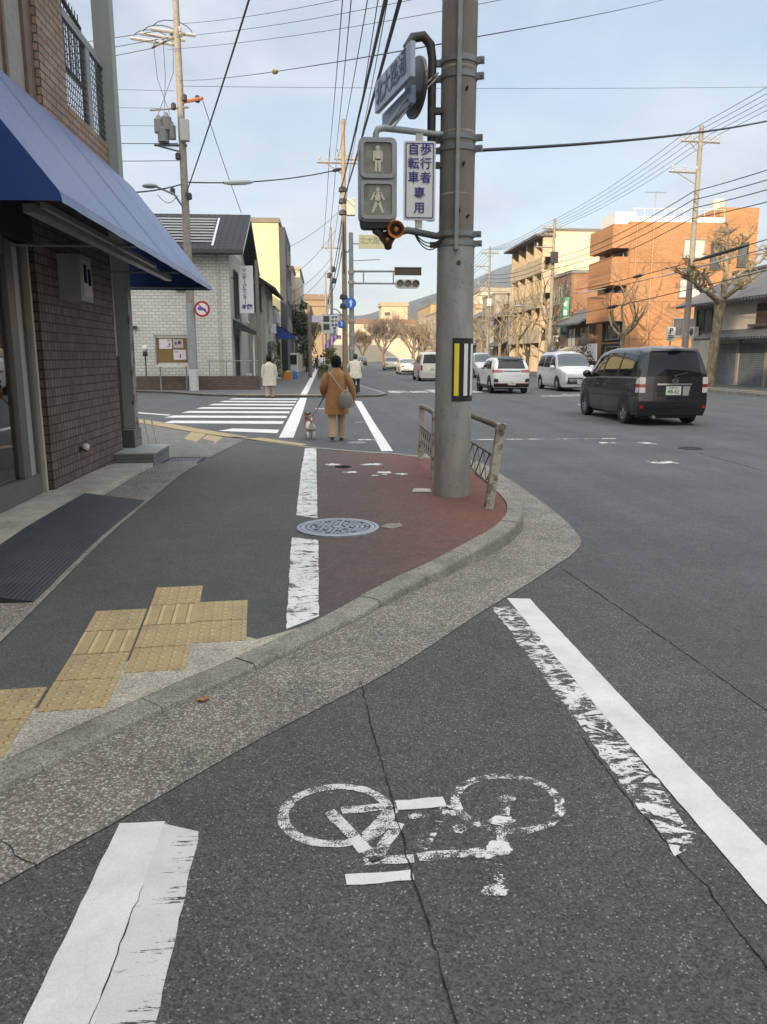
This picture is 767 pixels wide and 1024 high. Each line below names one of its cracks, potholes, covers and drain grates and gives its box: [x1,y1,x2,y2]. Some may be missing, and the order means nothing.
crack [359,681,458,1024]
manhole cover [296,518,379,538]
crack [0,840,38,869]
crack [89,888,142,1023]
crack [580,733,767,970]
